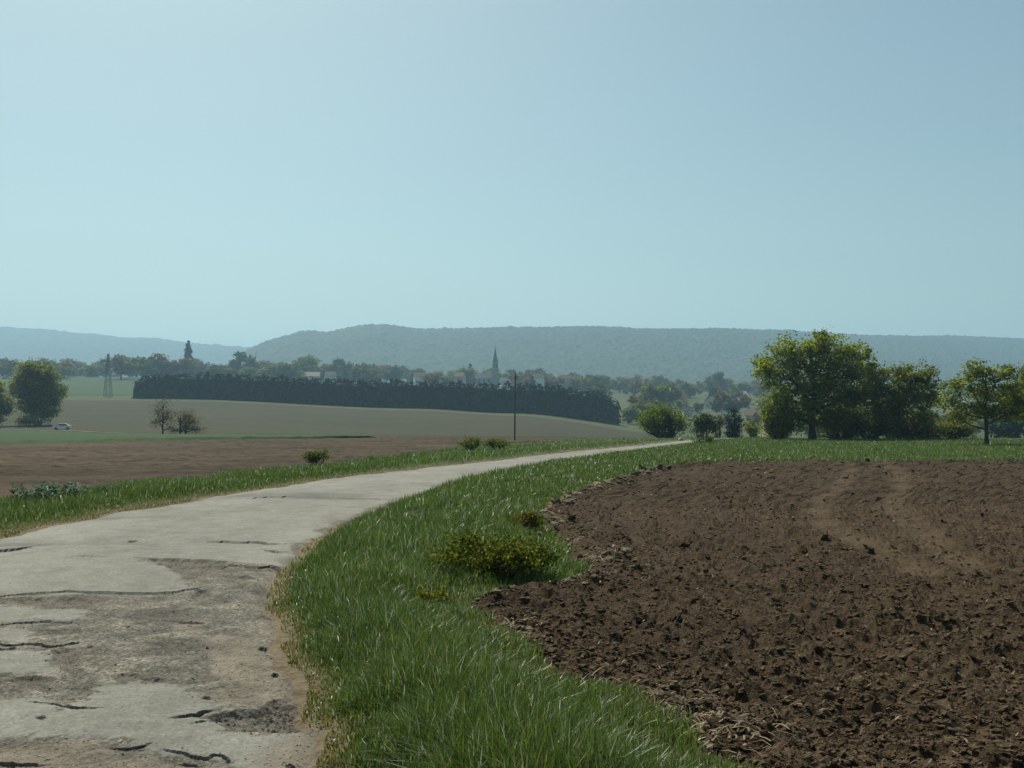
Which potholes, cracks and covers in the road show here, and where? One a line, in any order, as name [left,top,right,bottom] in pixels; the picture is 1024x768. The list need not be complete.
crack [0,642,76,651]
crack [176,710,209,723]
crack [216,541,280,572]
crack [166,749,229,768]
crack [2,588,200,597]
pothole [199,699,312,735]
